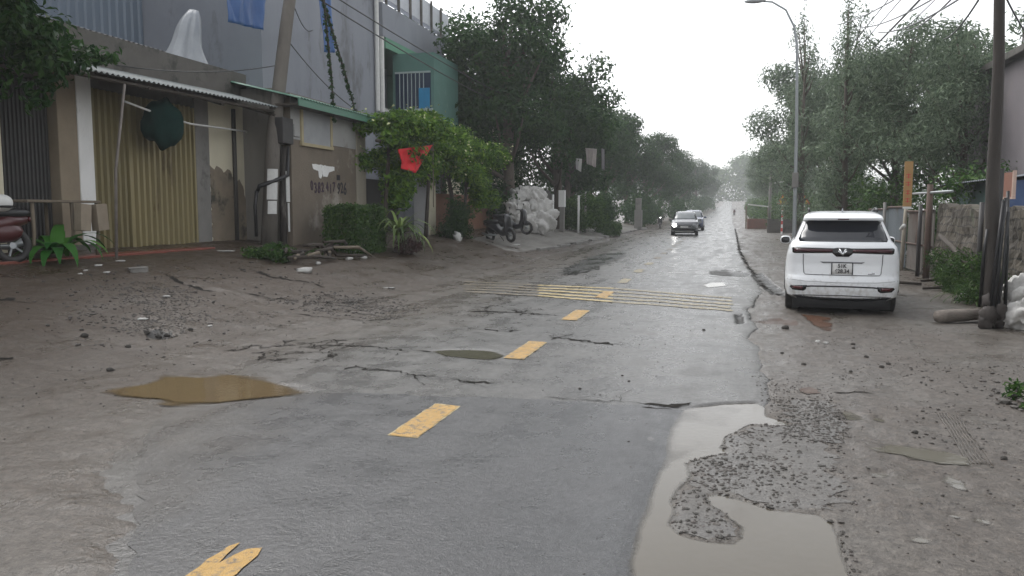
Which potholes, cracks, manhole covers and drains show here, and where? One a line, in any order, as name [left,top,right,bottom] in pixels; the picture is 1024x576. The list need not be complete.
crack [224,339,502,386]
crack [555,390,691,409]
crack [552,333,613,345]
crack [453,294,613,333]
crack [735,229,782,296]
